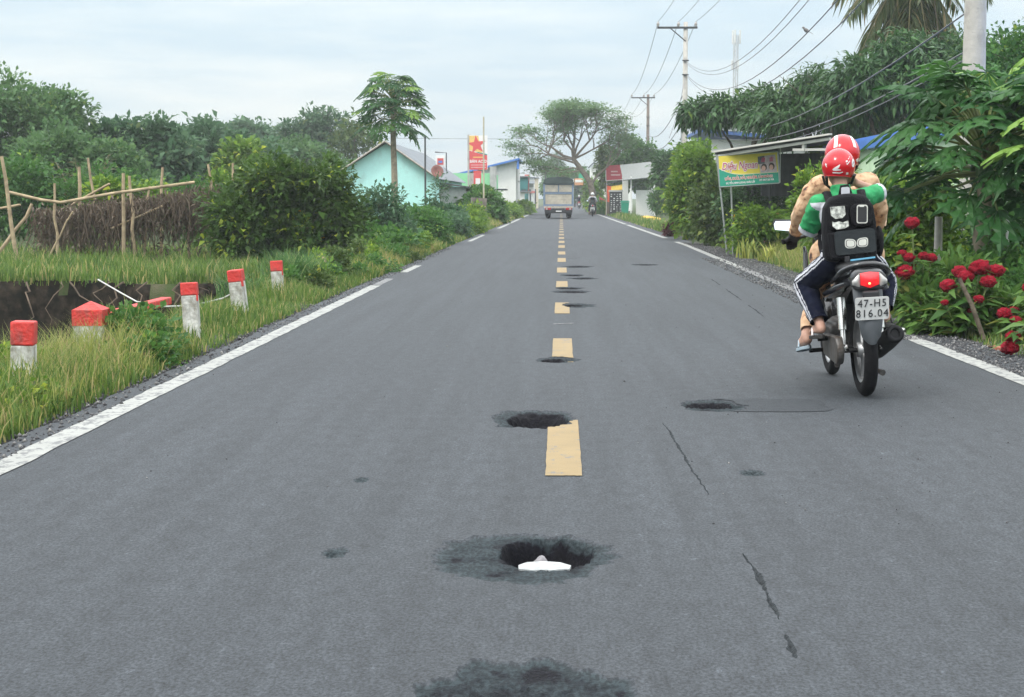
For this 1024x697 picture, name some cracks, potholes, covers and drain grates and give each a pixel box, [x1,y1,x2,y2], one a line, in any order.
crack [663,424,798,659]
pothole [431,533,624,586]
pothole [491,410,576,429]
pothole [680,399,747,412]
